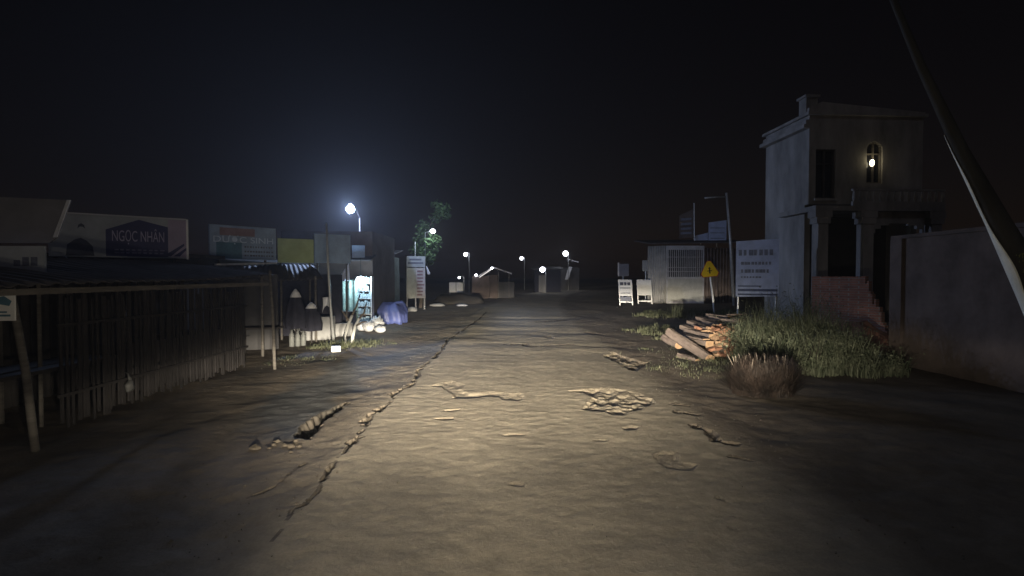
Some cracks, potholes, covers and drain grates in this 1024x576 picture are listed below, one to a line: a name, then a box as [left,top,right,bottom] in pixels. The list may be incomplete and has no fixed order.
pothole [602,352,651,371]
pothole [429,380,526,401]
pothole [651,450,700,471]
crack [245,312,487,542]
pothole [566,387,656,416]
crack [669,403,756,462]
